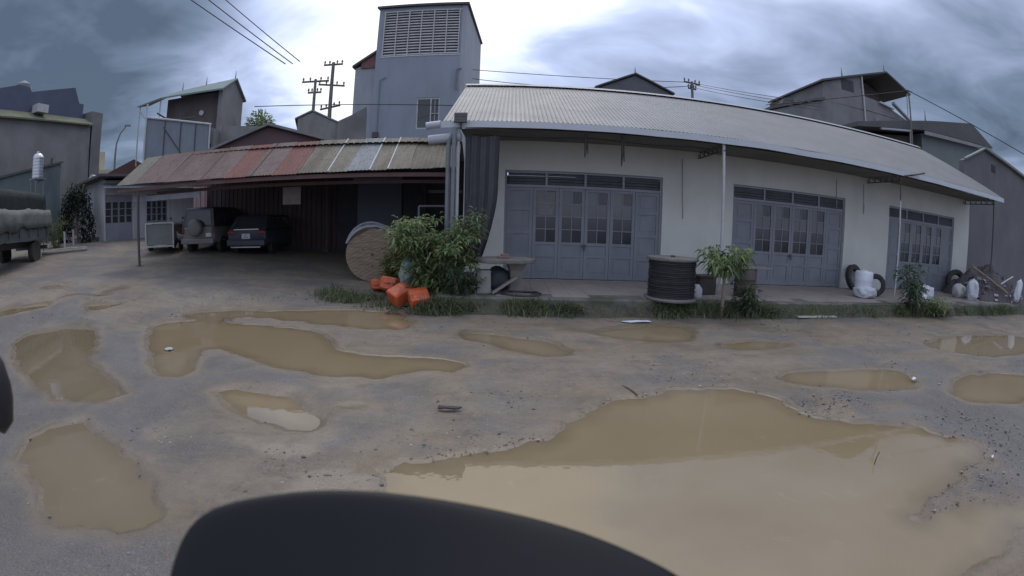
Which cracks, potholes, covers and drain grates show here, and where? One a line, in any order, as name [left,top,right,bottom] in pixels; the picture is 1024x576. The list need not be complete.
pothole [0,302,51,316]
pothole [716,340,796,350]
pothole [374,387,1024,576]
pothole [589,324,698,343]
pothole [14,419,168,535]
pothole [924,333,1024,357]
pothole [460,331,572,357]
pothole [211,385,328,433]
pothole [11,325,127,403]
pothole [145,309,469,380]
pothole [949,371,1024,404]
pothole [775,368,920,391]
